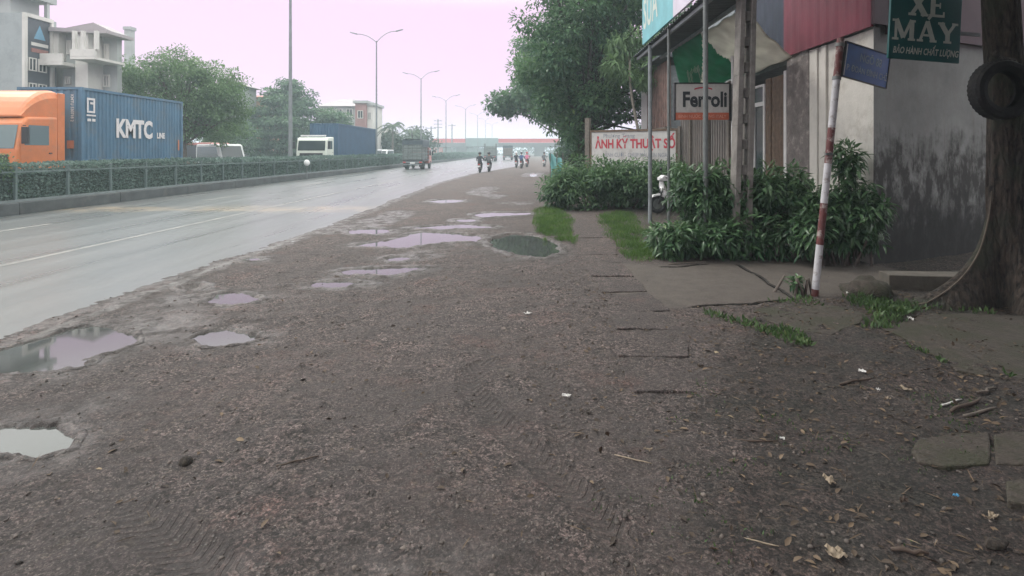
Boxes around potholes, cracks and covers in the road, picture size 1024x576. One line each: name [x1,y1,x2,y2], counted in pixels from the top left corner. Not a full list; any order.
crack [692,264,795,308]
pothole [0,322,145,376]
pothole [183,326,271,349]
pothole [467,211,540,219]
pothole [477,232,568,259]
pothole [345,230,493,250]
pothole [303,277,379,290]
pothole [0,417,88,462]
pothole [196,290,268,307]
pothole [332,265,431,278]
